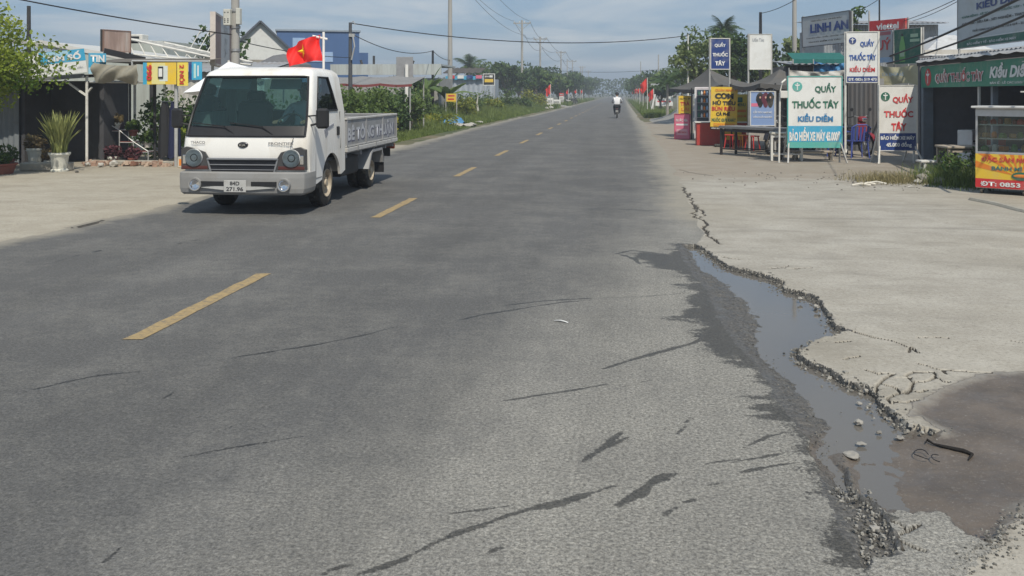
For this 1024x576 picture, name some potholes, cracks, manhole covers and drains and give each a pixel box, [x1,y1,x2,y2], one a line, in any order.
crack [835,330,993,404]
pothole [678,244,1024,570]
crack [681,172,739,260]
